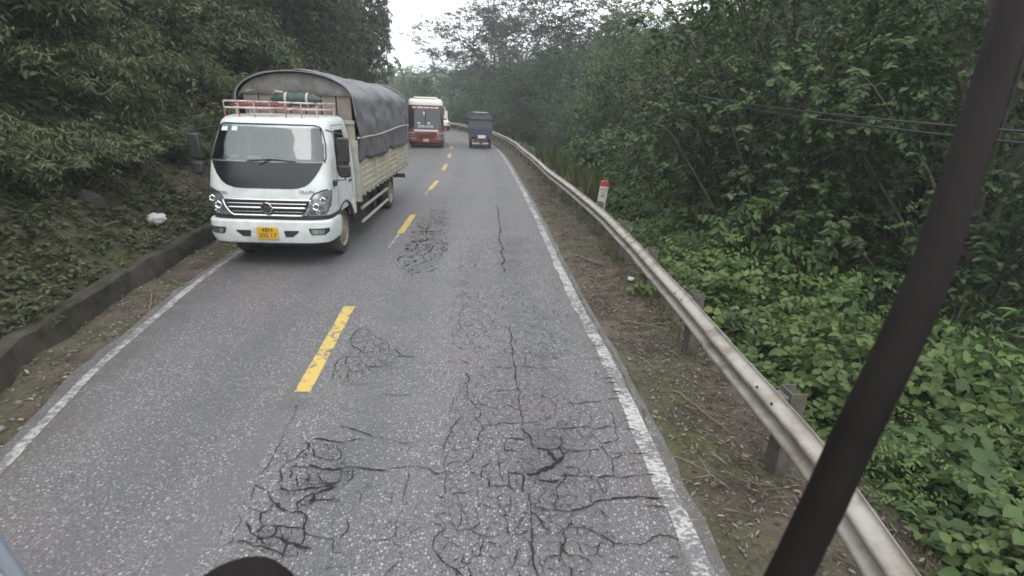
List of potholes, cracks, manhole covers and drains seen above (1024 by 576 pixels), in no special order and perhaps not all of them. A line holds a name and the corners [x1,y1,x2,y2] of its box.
crack [224,426,440,574]
crack [496,207,528,272]
crack [397,198,450,275]
crack [319,234,686,576]
